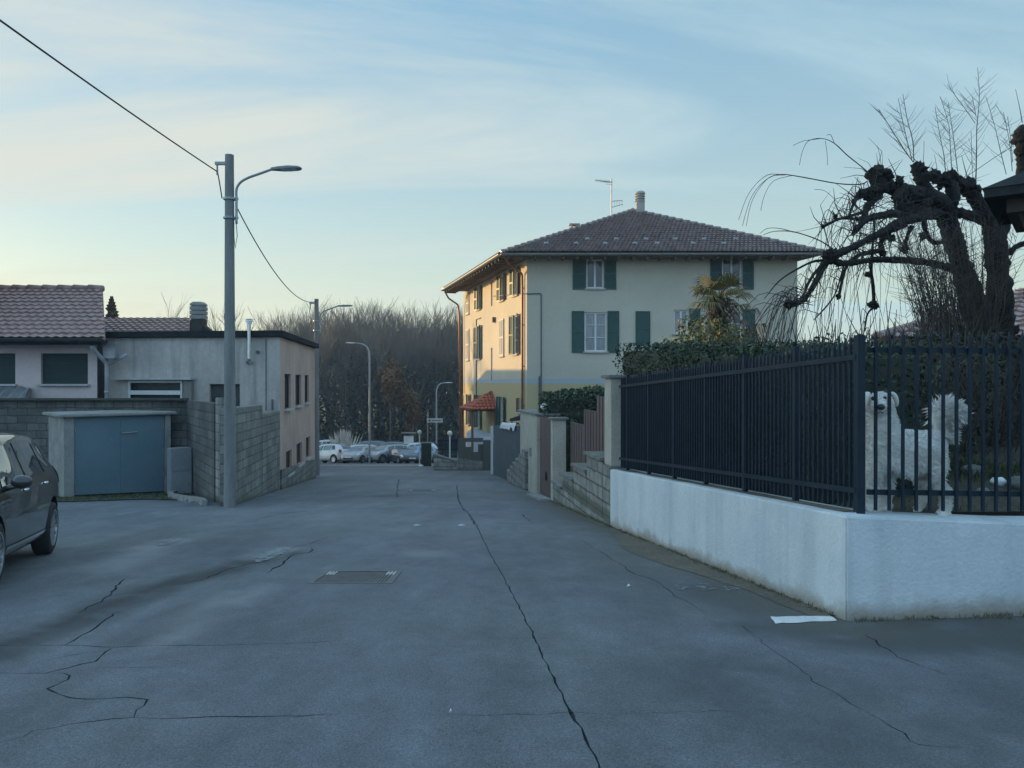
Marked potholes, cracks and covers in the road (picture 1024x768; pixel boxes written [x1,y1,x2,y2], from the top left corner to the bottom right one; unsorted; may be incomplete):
crack [198,539,321,581]
crack [0,574,747,742]
crack [742,626,947,675]
drain grate [307,570,403,584]
